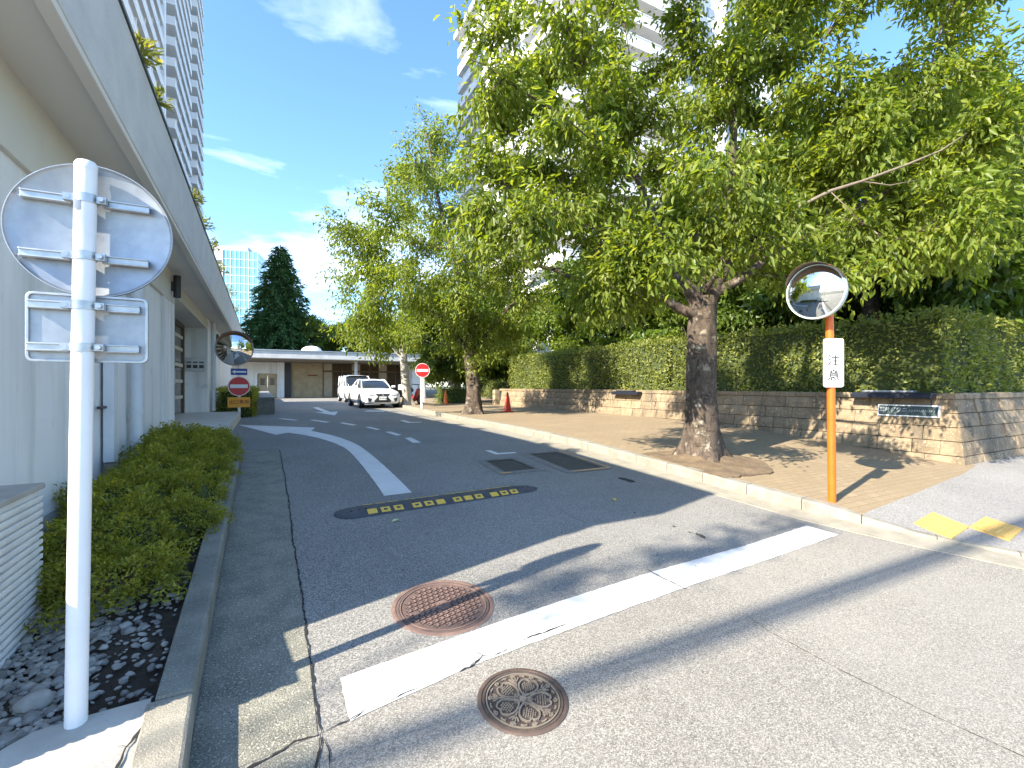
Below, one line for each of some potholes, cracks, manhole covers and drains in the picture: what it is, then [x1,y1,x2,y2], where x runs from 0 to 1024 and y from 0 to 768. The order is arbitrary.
manhole cover [391,580,494,636]
manhole cover [476,457,547,474]
manhole cover [477,668,569,737]
crack [247,449,360,768]
manhole cover [520,450,612,473]
